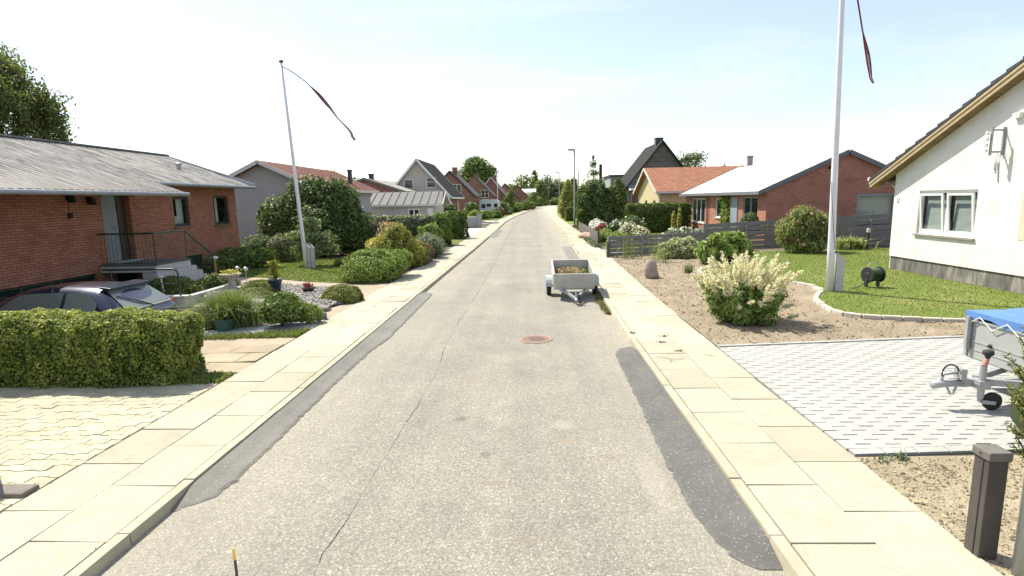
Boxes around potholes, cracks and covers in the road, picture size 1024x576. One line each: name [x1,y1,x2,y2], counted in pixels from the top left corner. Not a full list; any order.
manhole cover [520,335,553,343]
crack [314,225,515,574]
